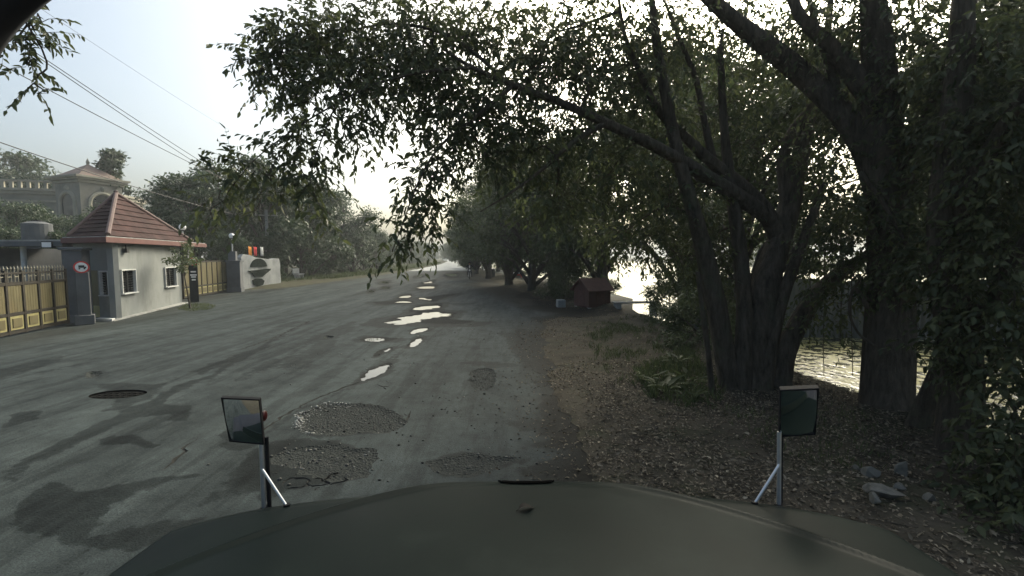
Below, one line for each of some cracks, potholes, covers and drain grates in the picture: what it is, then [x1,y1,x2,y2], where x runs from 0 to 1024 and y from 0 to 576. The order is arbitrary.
crack [282,472,349,490]
pothole [467,368,497,391]
pothole [293,401,408,436]
manhole cover [88,390,147,399]
pothole [382,310,472,325]
pothole [269,444,380,482]
pothole [360,362,393,381]
pothole [425,453,518,478]
crack [165,437,198,469]
pothole [408,303,443,312]
